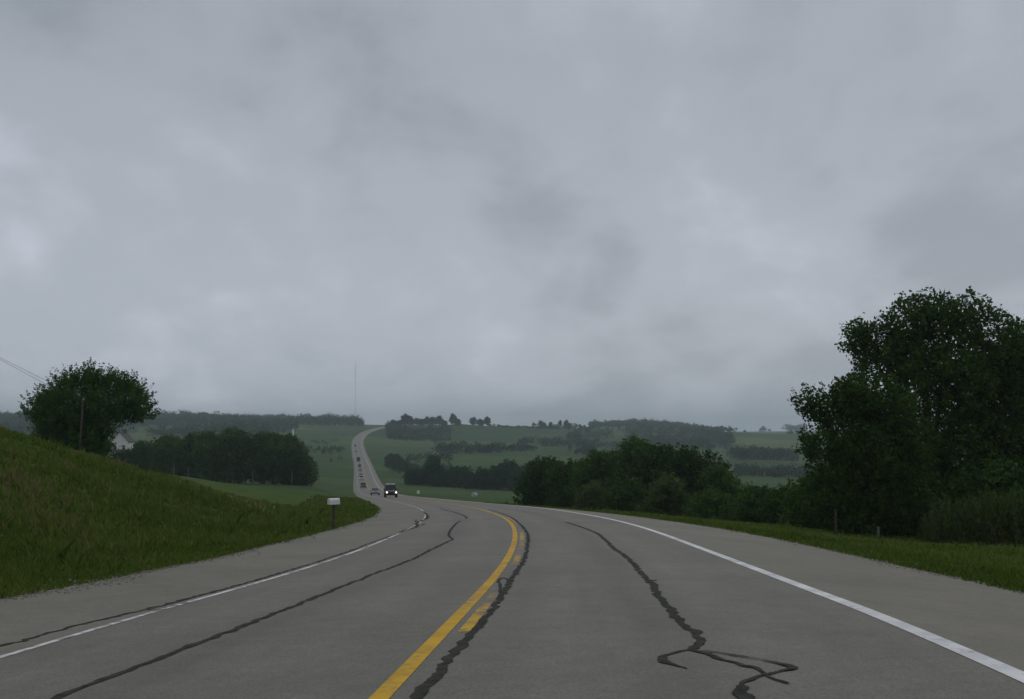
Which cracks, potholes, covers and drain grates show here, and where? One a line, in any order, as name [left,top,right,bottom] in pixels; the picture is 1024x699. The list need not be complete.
crack [657,649,799,684]
crack [497,577,511,593]
crack [399,511,430,533]
